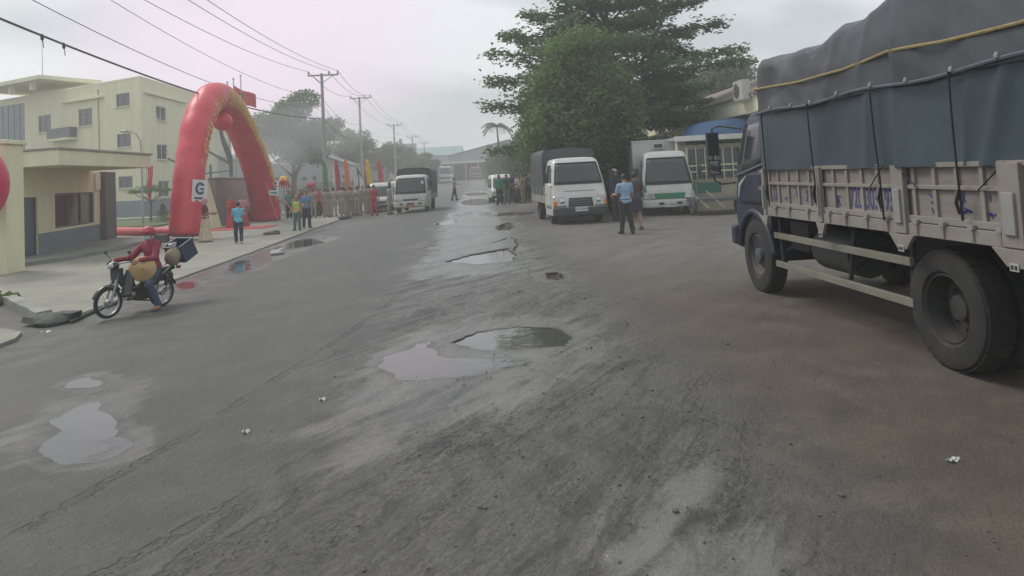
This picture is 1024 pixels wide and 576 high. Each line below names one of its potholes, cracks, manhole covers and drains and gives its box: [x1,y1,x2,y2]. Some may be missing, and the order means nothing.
pothole [445,248,517,264]
pothole [545,272,564,280]
pothole [450,326,573,351]
